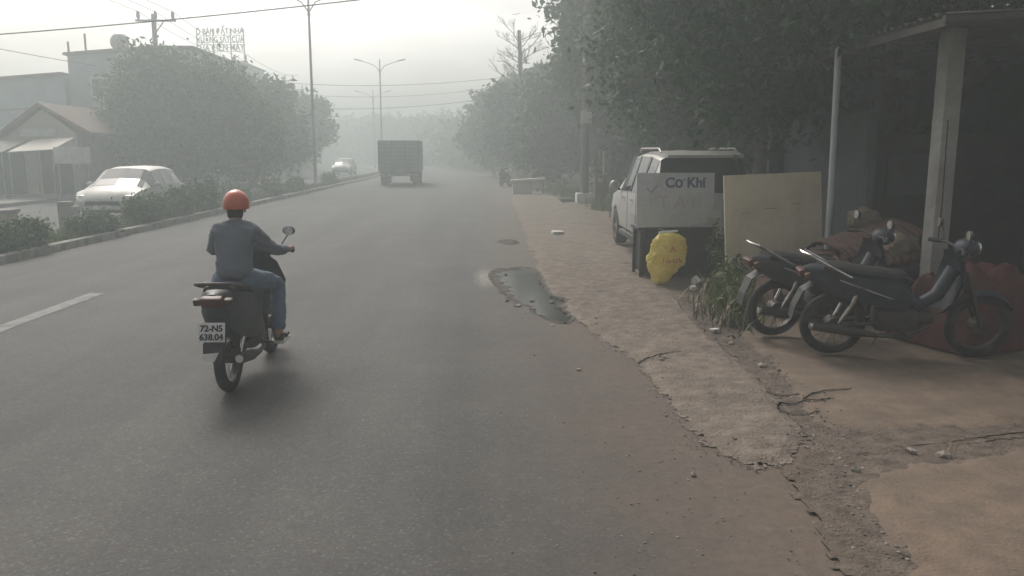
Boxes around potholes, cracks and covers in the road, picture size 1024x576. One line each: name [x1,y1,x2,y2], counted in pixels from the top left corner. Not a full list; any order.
crack [638,351,681,364]
pothole [488,266,576,324]
crack [856,430,1024,456]
crack [765,388,852,416]
